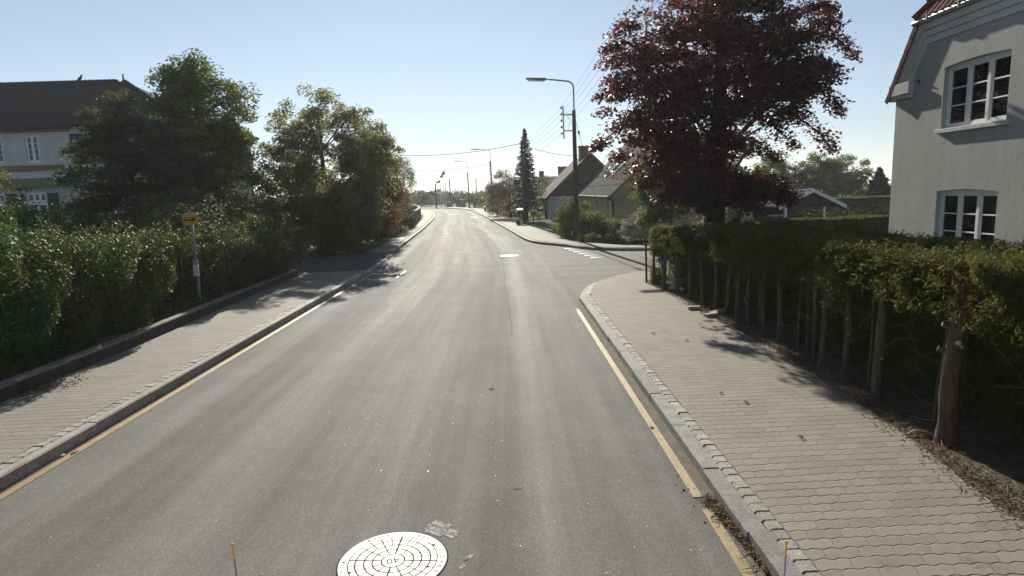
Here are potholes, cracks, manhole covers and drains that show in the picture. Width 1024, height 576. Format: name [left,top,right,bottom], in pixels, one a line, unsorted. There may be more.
manhole cover [336,532,449,576]
